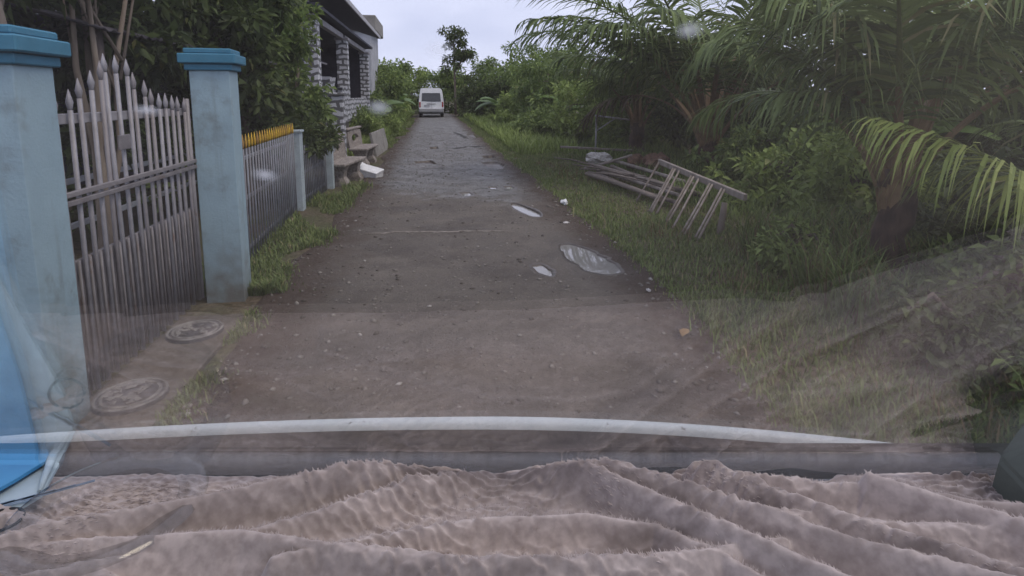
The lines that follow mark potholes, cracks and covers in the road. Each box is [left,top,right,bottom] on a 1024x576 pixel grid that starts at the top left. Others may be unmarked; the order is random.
manhole cover [90,377,170,417]
crack [452,132,484,149]
pothole [505,201,549,220]
pothole [550,241,634,281]
manhole cover [165,319,224,344]
